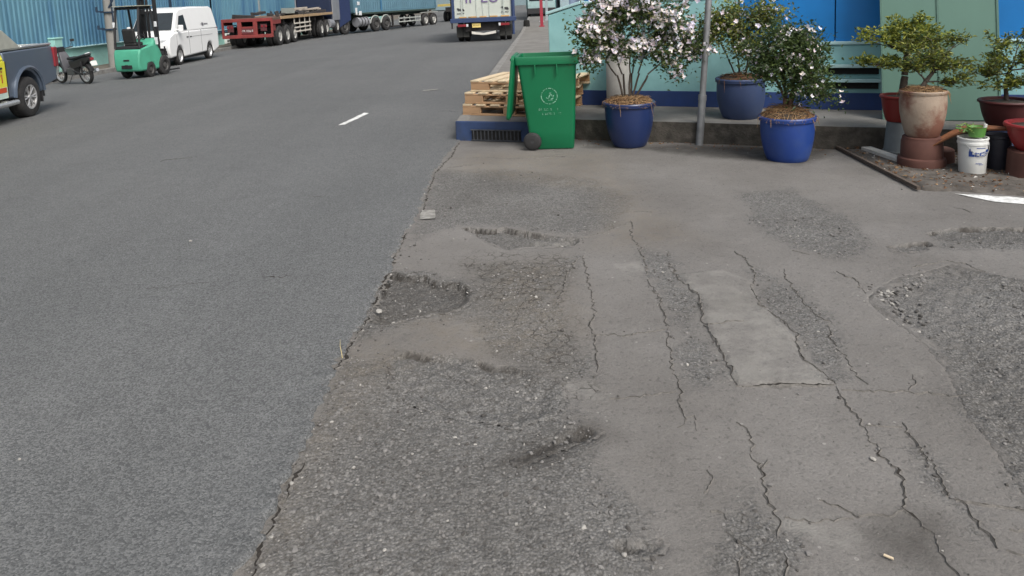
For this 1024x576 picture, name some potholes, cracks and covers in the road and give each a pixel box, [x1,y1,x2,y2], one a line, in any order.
pothole [363,271,476,328]
drain grate [471,129,522,142]
pothole [461,227,583,251]
crack [559,211,1024,576]
pothole [509,426,605,468]
crack [251,462,306,576]
